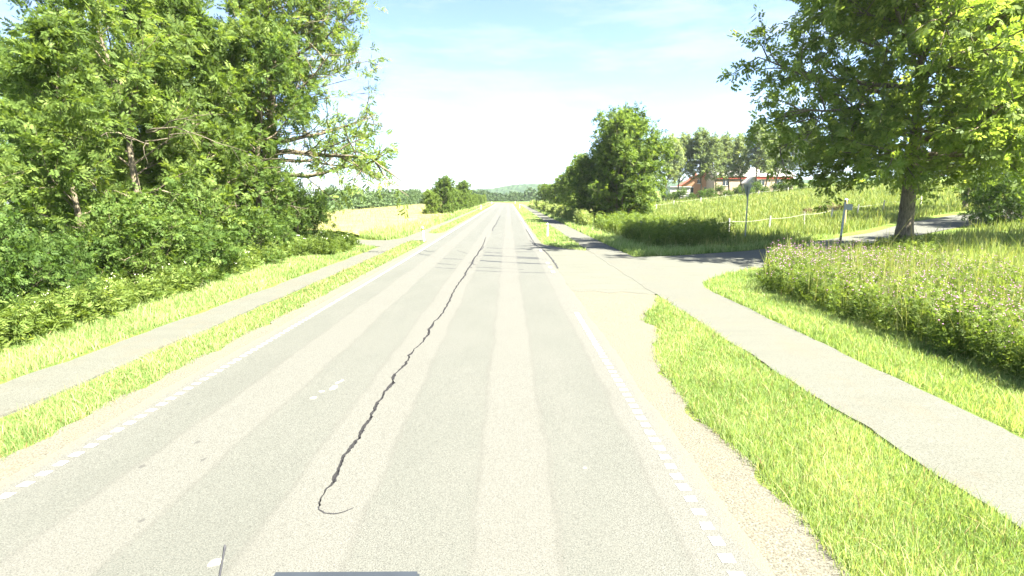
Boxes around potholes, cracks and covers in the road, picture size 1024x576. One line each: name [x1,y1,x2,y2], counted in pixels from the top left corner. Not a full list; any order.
crack [318,217,500,514]
